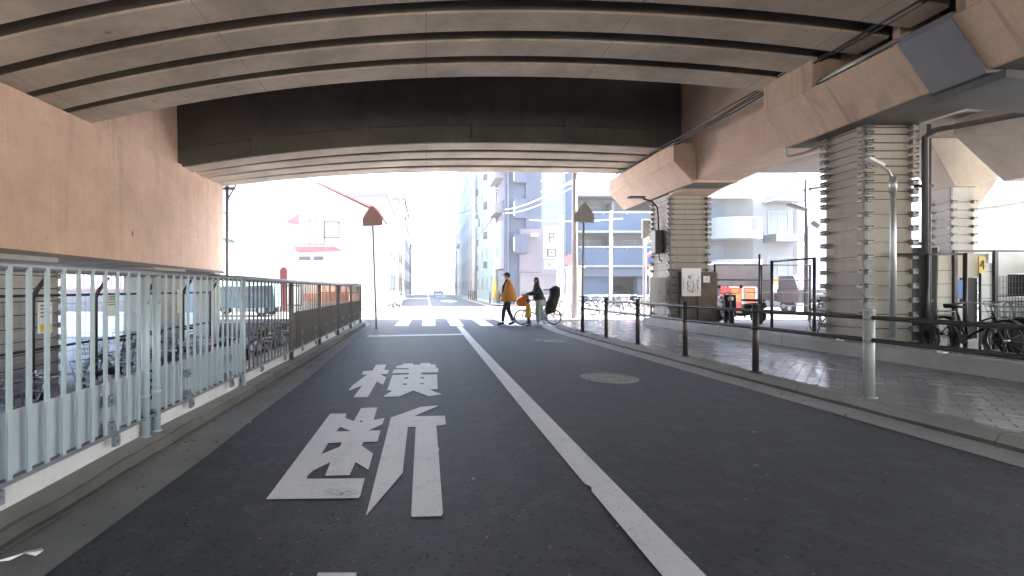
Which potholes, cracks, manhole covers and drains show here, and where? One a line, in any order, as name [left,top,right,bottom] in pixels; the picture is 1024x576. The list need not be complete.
manhole cover [580,373,639,384]
